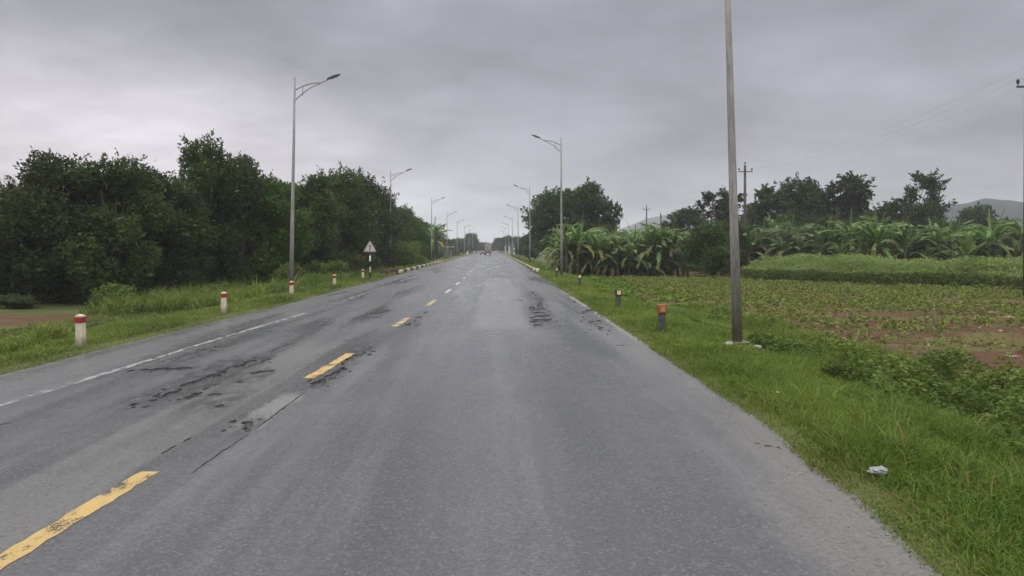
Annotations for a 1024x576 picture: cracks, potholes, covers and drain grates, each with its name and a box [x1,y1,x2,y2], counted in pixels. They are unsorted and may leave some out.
crack [161,391,306,474]
pothole [129,359,272,408]
pothole [306,364,352,388]
